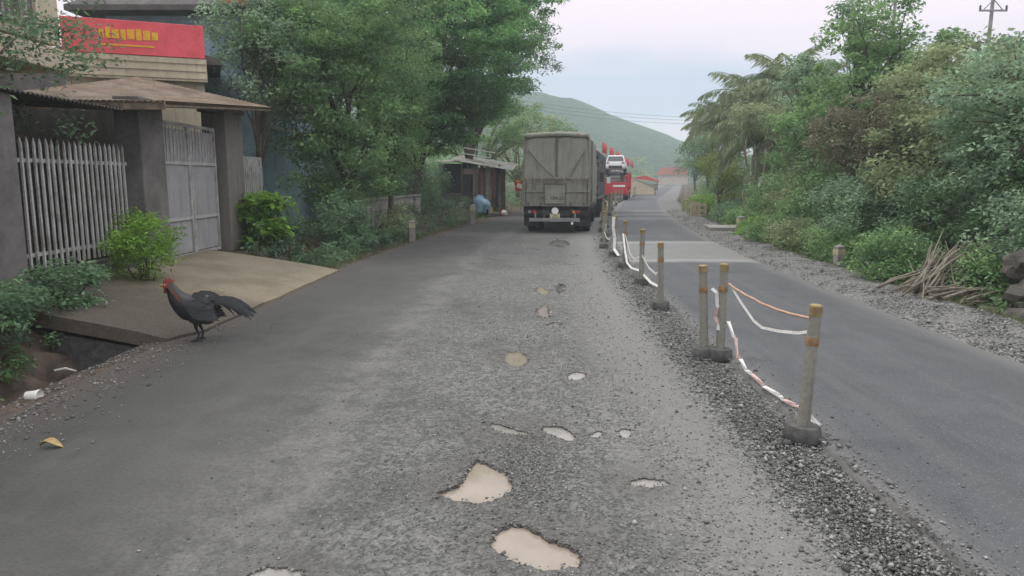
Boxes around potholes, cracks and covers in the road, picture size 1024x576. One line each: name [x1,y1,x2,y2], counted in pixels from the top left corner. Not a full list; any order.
pothole [614,427,635,439]
pothole [549,239,570,248]
pothole [567,370,588,380]
pothole [501,351,530,367]
pothole [243,563,306,576]
pothole [534,306,553,318]
pothole [626,476,674,488]
pothole [541,424,578,441]
pothole [487,519,589,573]
pothole [432,459,517,504]
pothole [485,422,529,435]
